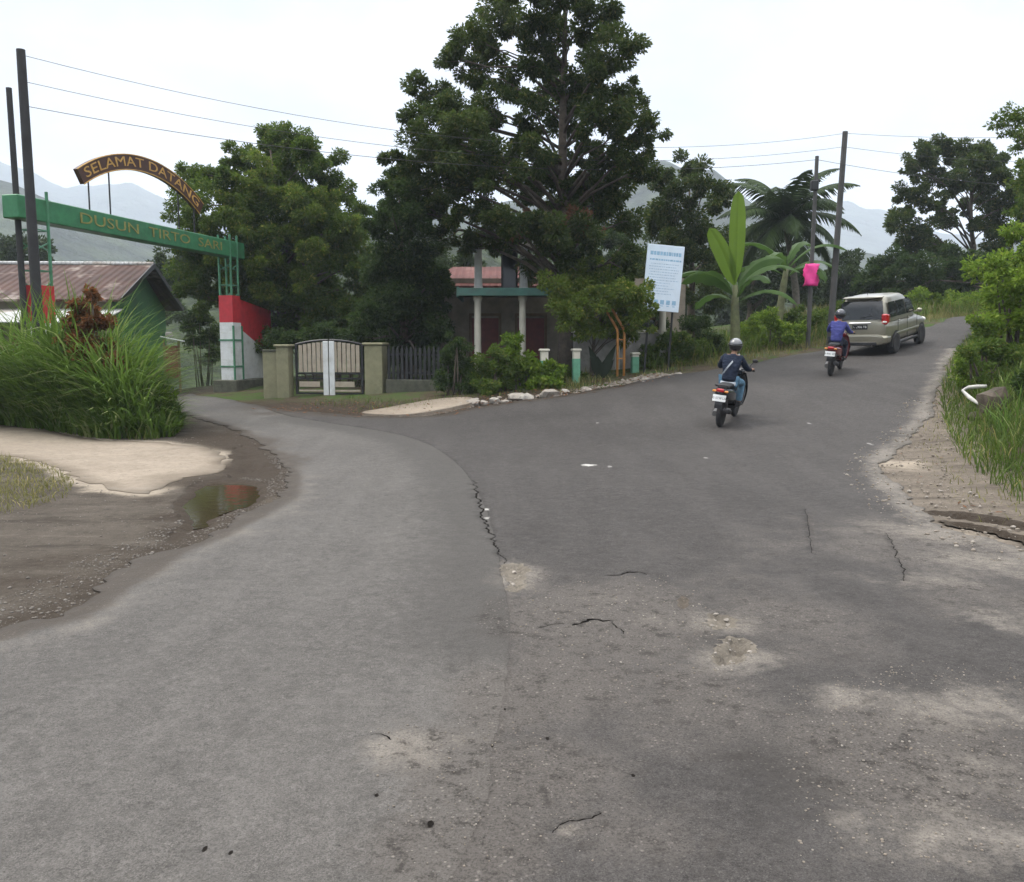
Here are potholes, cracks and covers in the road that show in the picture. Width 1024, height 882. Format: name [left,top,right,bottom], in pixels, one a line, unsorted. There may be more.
pothole [711,635,758,666]
crack [552,813,601,833]
pothole [499,563,533,592]
crack [541,619,624,634]
